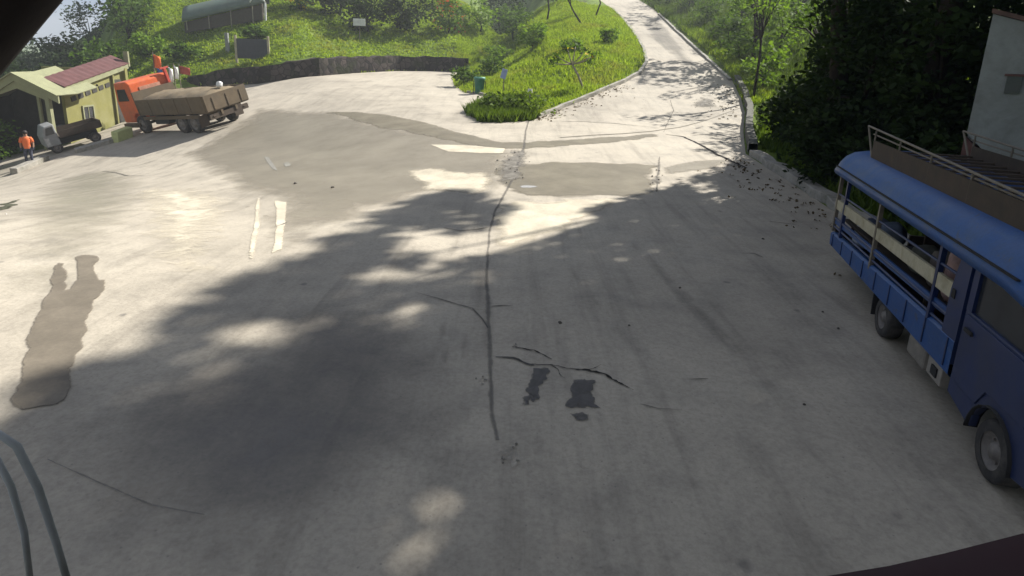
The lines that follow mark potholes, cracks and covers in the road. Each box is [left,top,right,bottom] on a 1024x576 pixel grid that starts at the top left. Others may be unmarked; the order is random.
crack [416,292,511,329]
crack [568,100,747,168]
crack [496,347,679,410]
